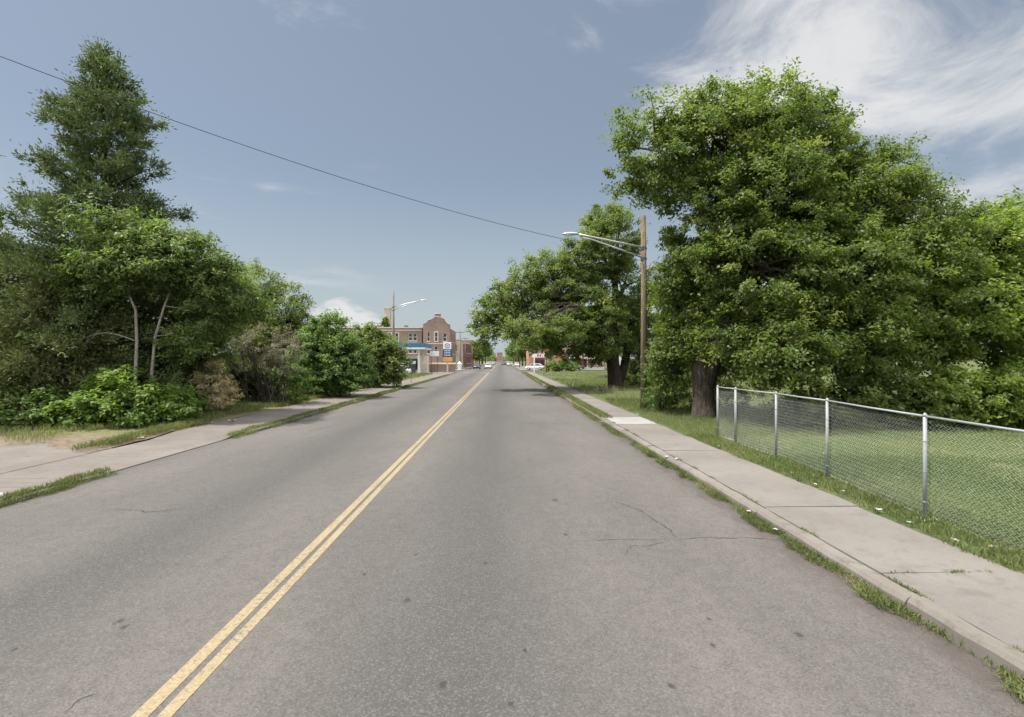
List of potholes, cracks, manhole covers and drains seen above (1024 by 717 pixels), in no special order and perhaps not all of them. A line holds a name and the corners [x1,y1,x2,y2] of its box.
crack [591,503,765,555]
